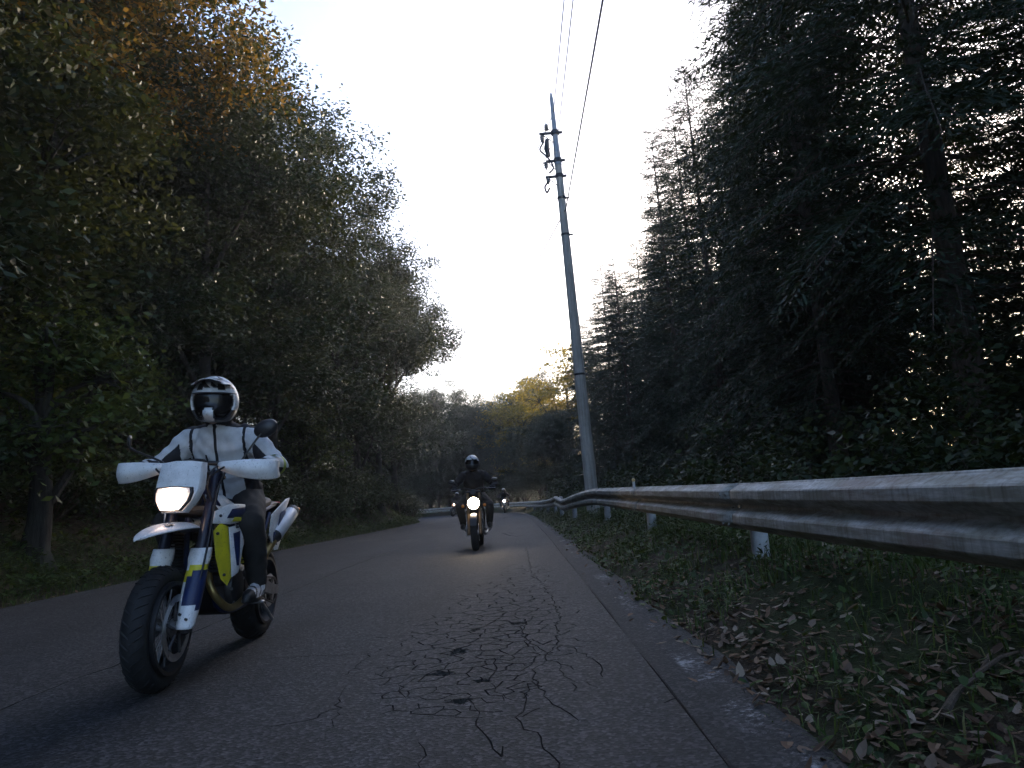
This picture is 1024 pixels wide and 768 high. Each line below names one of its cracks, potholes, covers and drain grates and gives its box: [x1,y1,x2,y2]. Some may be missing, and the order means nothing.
crack [267,649,388,734]
